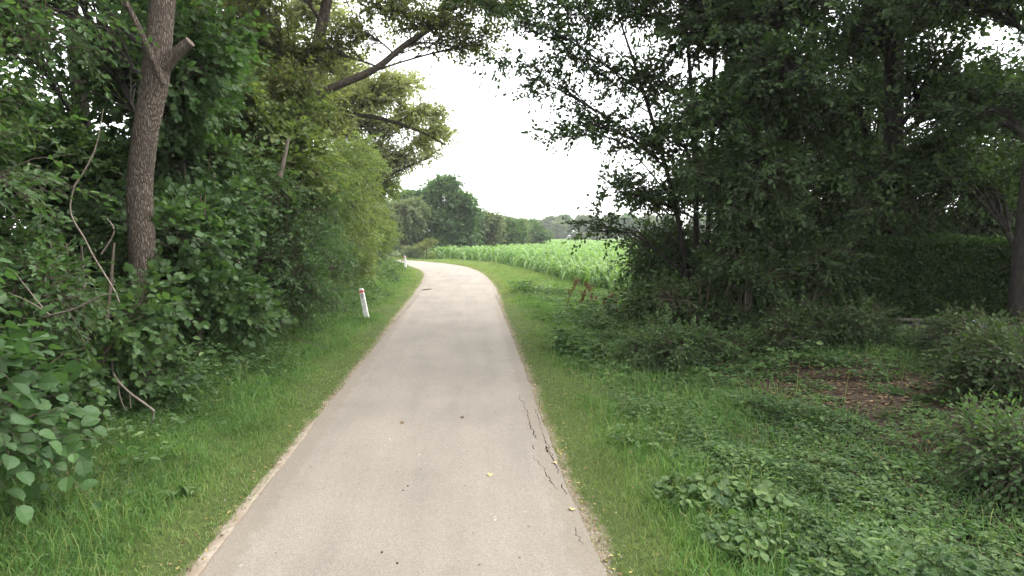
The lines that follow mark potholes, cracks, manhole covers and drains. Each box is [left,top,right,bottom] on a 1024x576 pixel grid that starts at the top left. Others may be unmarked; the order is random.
crack [518,398,567,494]
